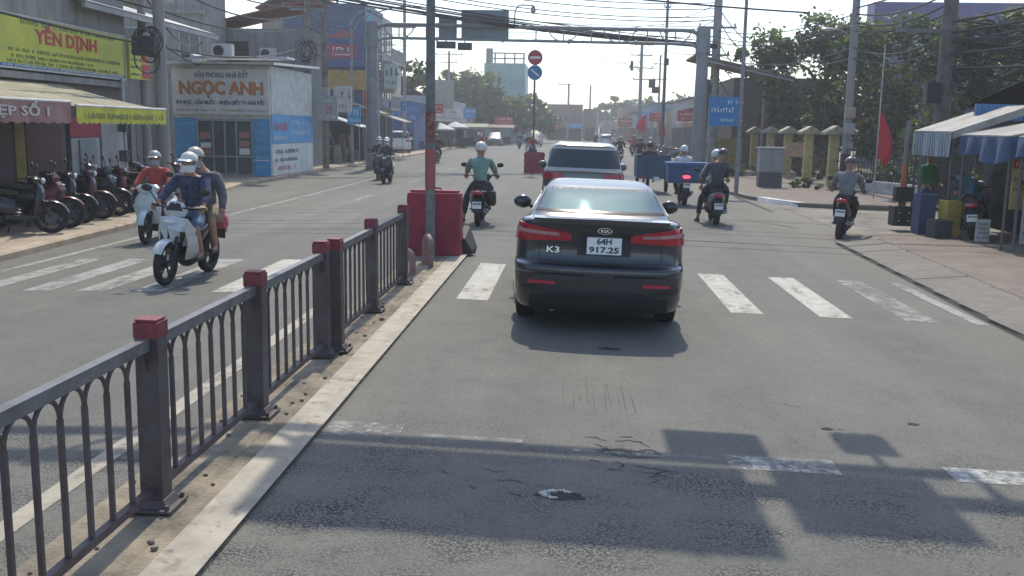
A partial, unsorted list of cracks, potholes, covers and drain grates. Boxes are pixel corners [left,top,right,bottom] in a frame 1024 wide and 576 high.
crack [585,436,674,482]
pothole [534,489,585,500]
crack [441,468,529,497]
